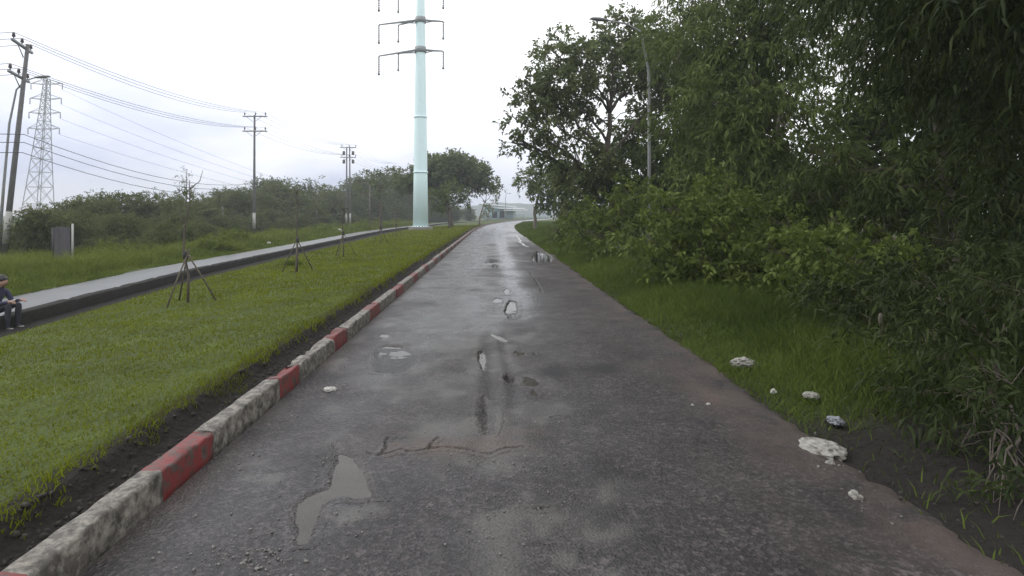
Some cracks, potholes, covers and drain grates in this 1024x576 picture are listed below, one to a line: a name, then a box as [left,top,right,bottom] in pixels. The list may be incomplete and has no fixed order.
pothole [514,375,546,389]
pothole [470,393,505,438]
pothole [277,438,392,552]
pothole [498,299,524,320]
pothole [365,343,427,376]
pothole [484,333,513,344]
crack [356,414,571,460]
pothole [497,372,525,387]
pothole [472,349,493,373]
pothole [525,251,558,263]
